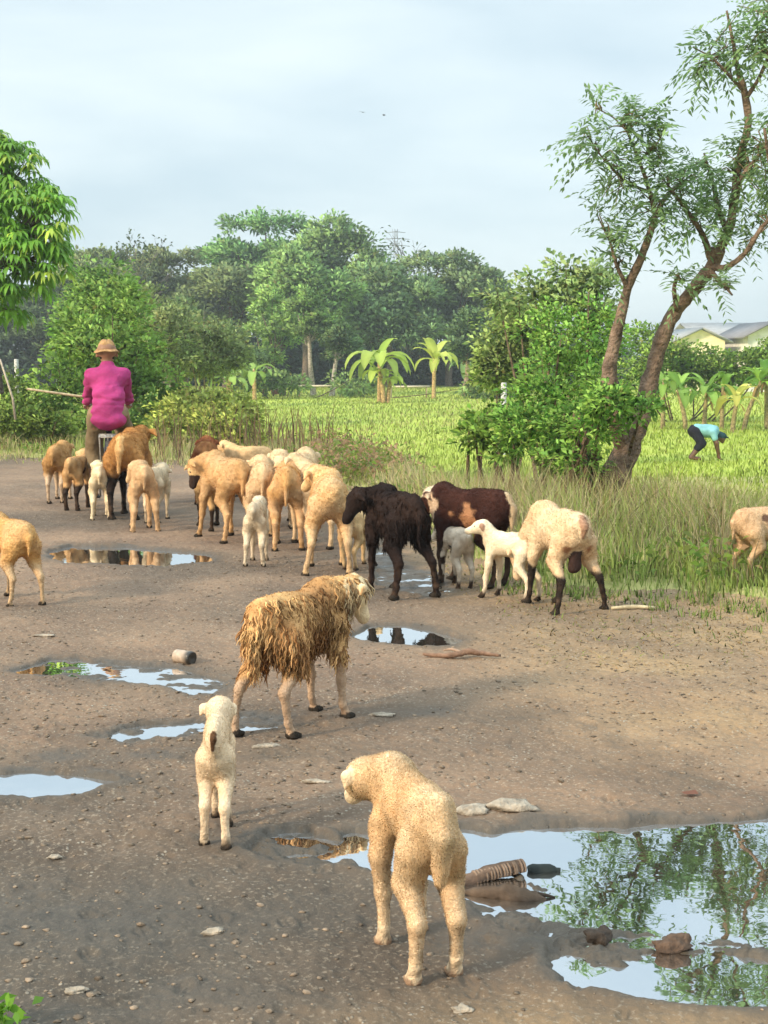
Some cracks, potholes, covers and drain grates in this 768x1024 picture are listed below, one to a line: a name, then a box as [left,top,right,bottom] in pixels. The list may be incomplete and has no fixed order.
pothole [79,709,297,744]
pothole [328,806,768,1012]
pothole [349,622,473,647]
pothole [5,654,233,696]
pothole [0,765,138,800]
pothole [41,543,218,567]
